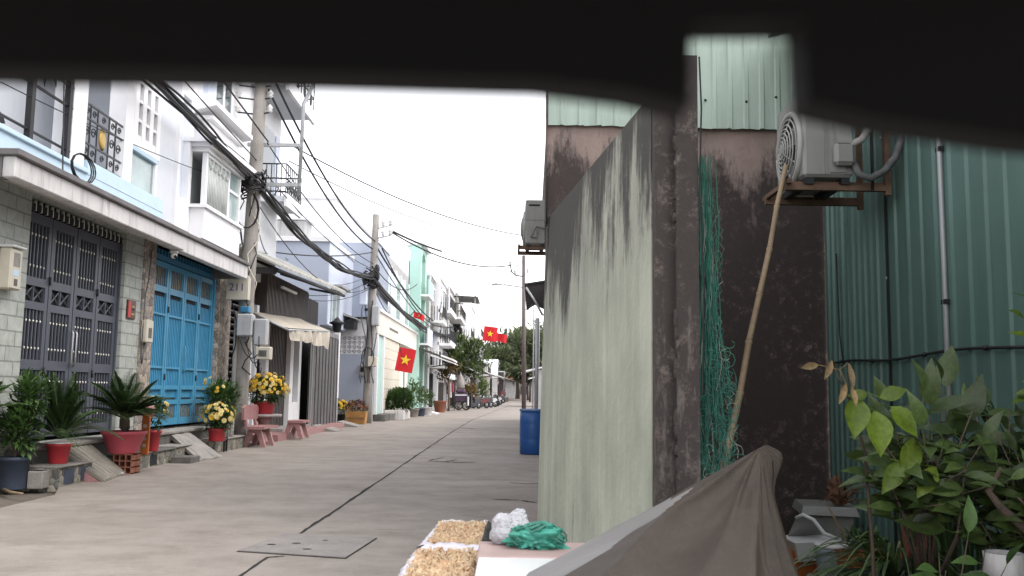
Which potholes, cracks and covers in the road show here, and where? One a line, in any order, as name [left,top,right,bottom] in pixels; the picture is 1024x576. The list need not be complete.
manhole cover [236,533,377,559]
